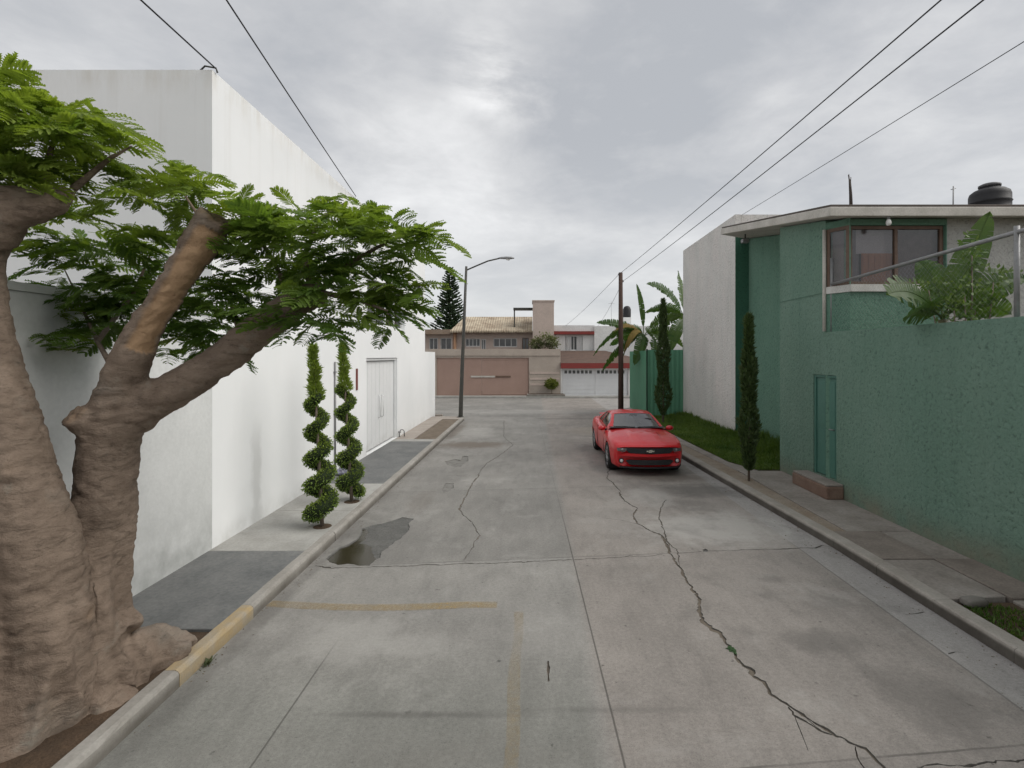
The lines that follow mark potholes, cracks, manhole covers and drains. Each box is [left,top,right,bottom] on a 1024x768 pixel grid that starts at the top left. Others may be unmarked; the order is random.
crack [319,422,886,768]
crack [917,759,1024,768]
pothole [326,517,413,566]
